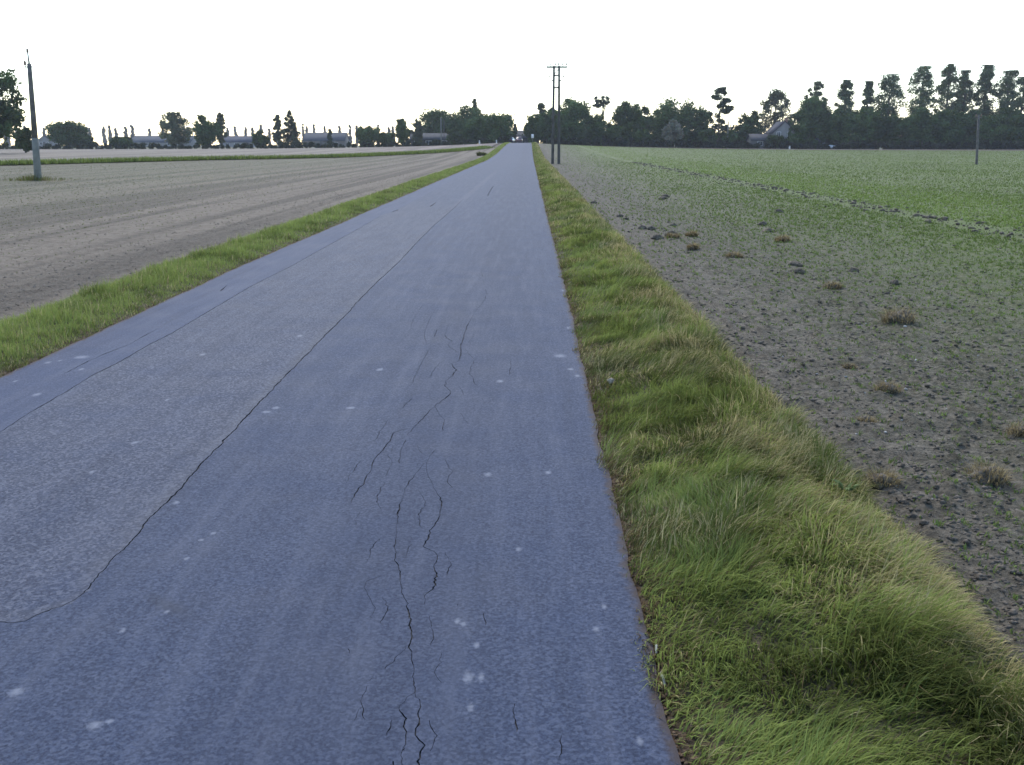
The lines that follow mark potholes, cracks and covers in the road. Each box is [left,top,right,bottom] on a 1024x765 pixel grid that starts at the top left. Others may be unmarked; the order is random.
crack [348,270,486,765]
